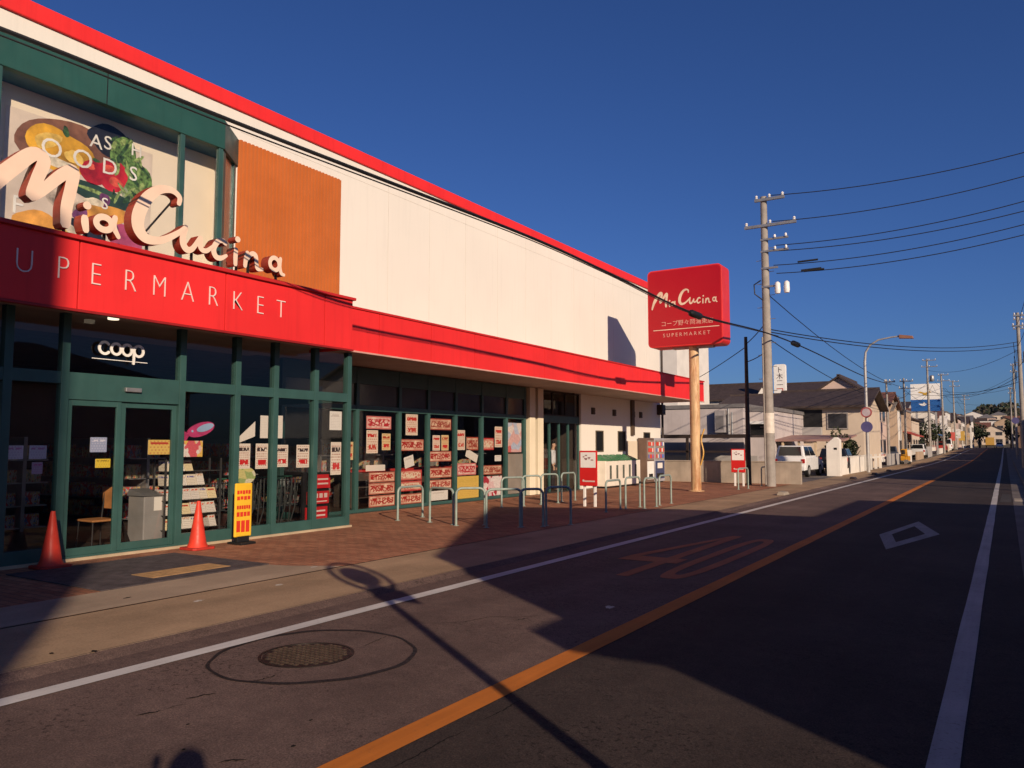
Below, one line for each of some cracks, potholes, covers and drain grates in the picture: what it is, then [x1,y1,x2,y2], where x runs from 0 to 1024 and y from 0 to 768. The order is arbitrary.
manhole cover [258,642,354,668]
